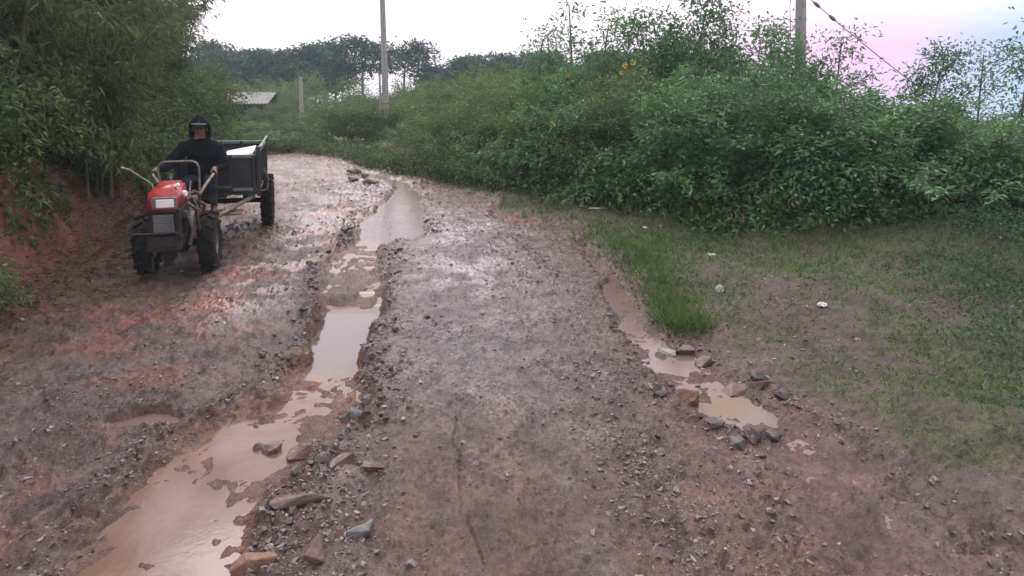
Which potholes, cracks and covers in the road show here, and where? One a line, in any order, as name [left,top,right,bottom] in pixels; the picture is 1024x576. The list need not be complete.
pothole [349,184,431,245]
pothole [103,400,189,427]
pothole [277,285,391,385]
crack [451,391,487,566]
pothole [317,241,393,295]
